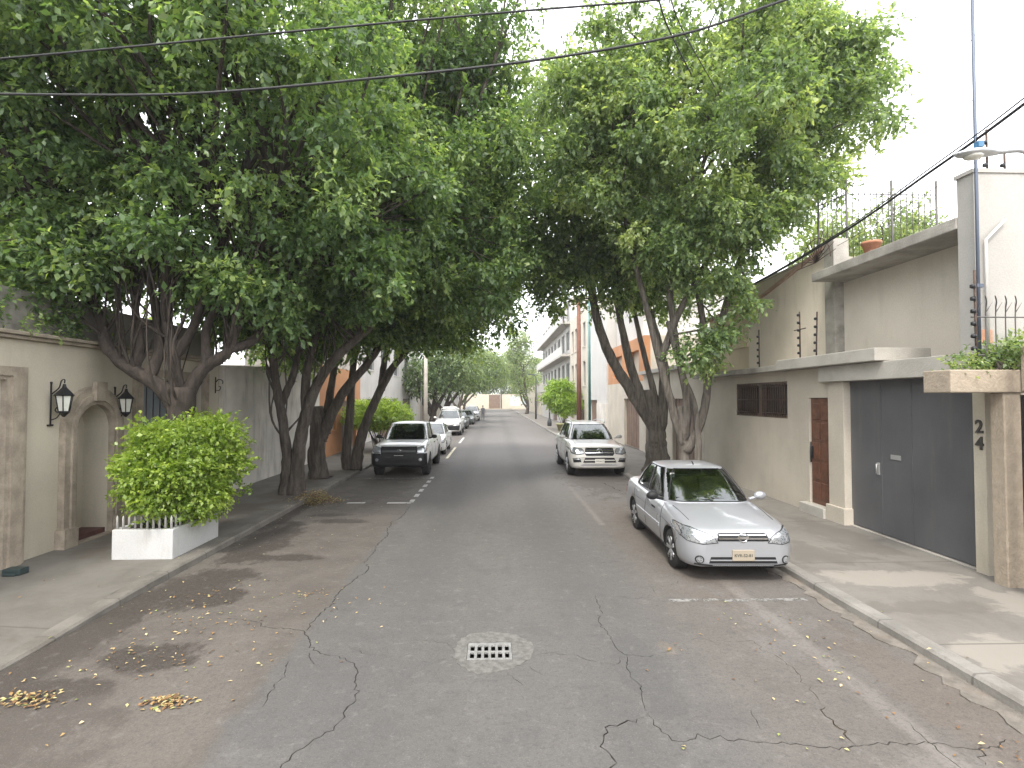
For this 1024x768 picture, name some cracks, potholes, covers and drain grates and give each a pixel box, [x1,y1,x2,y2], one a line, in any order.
crack [595,581,1005,765]
crack [236,506,410,768]
